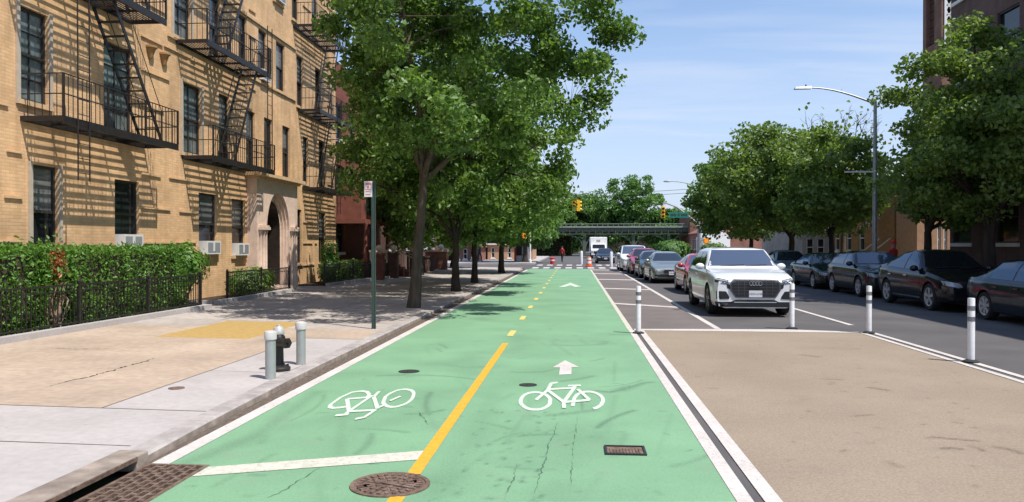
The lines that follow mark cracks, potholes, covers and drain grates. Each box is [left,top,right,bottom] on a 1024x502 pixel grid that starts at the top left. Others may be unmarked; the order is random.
crack [533,422,577,498]
drain grate [6,450,209,502]
manhole cover [349,472,430,498]
